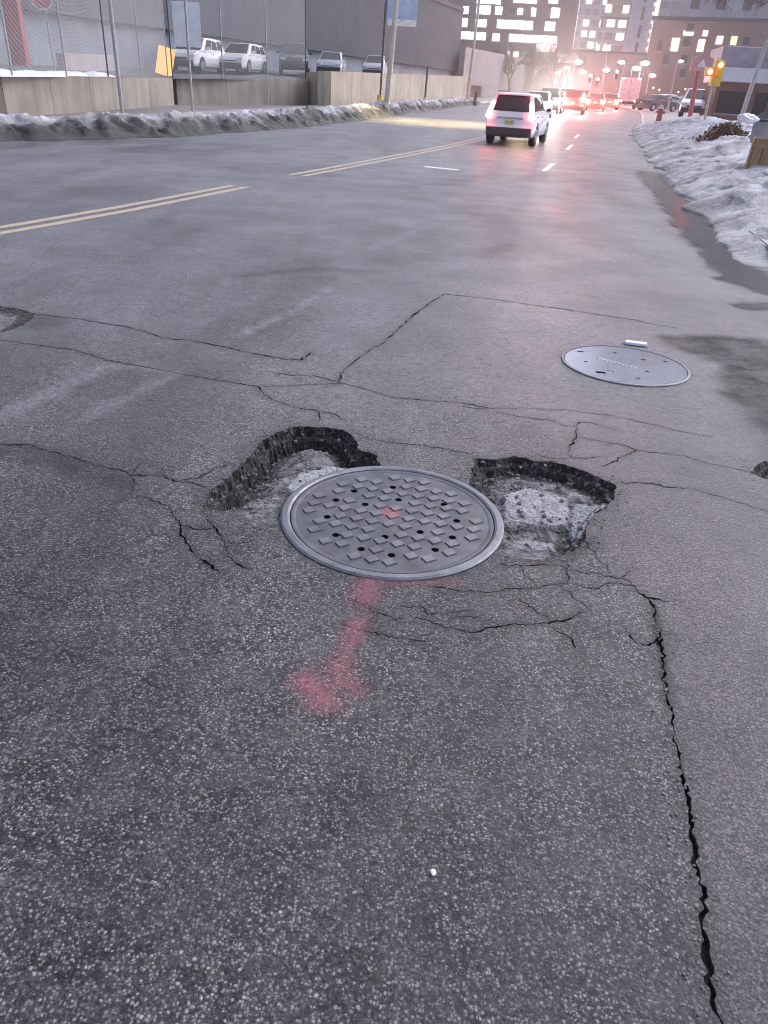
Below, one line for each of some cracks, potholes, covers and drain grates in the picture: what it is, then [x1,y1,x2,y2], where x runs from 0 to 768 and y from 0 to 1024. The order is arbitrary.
manhole cover [280,466,504,581]
pothole [0,306,35,332]
pothole [469,456,616,560]
crack [3,294,673,421]
pothole [202,426,381,530]
pothole [749,460,768,479]
manhole cover [561,345,691,387]
crack [343,542,724,1024]
crack [1,444,251,575]
crack [403,398,768,512]
